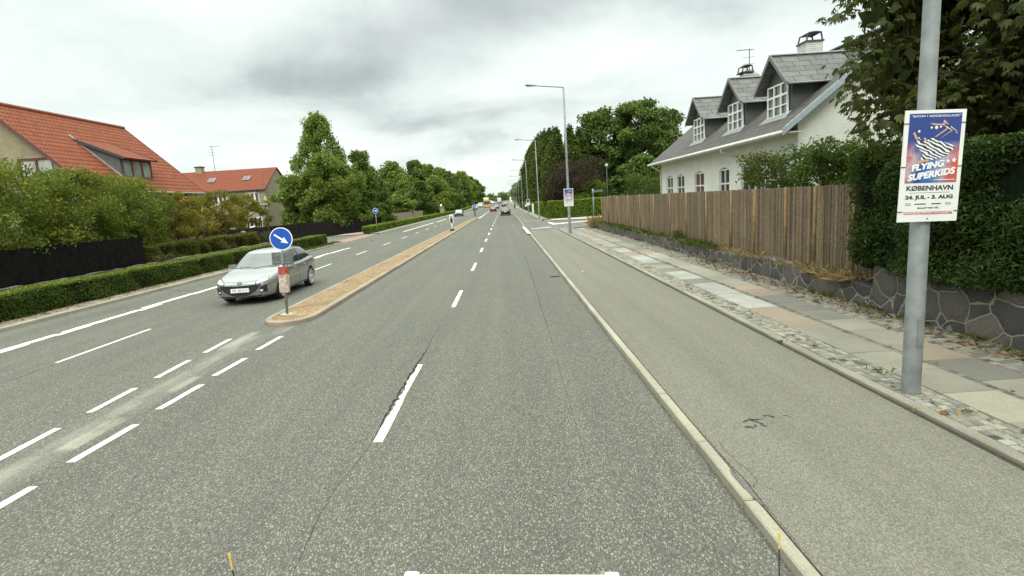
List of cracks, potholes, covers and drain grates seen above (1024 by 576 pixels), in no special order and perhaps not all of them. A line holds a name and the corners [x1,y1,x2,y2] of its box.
crack [743,415,792,429]
